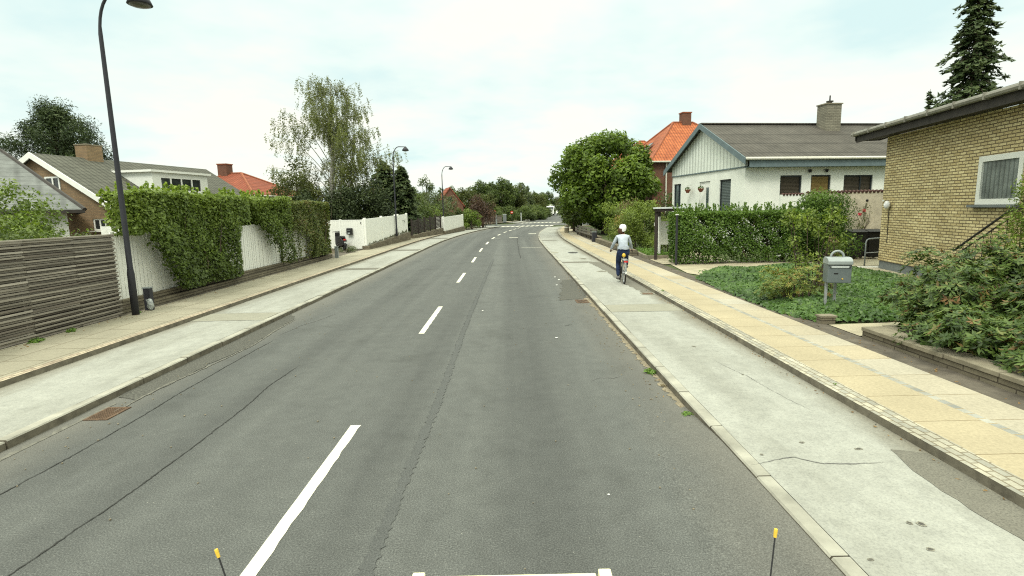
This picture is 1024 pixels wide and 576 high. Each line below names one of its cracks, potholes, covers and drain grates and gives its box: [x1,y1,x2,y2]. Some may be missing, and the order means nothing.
crack [753,457,891,465]
crack [1,344,266,494]
drain grate [82,407,132,421]
crack [7,368,295,576]
